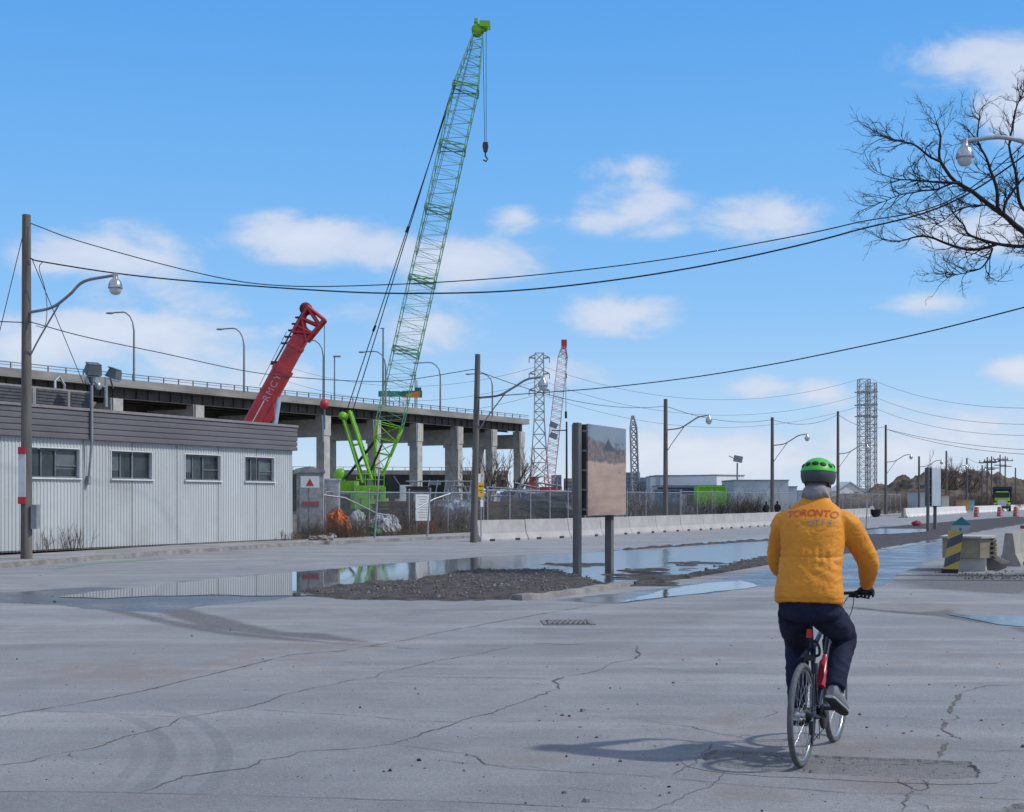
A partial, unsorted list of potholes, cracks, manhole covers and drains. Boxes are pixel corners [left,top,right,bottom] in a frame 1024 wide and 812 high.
crack [392,710,1017,811]
crack [1,647,767,790]
crack [873,684,1020,758]
